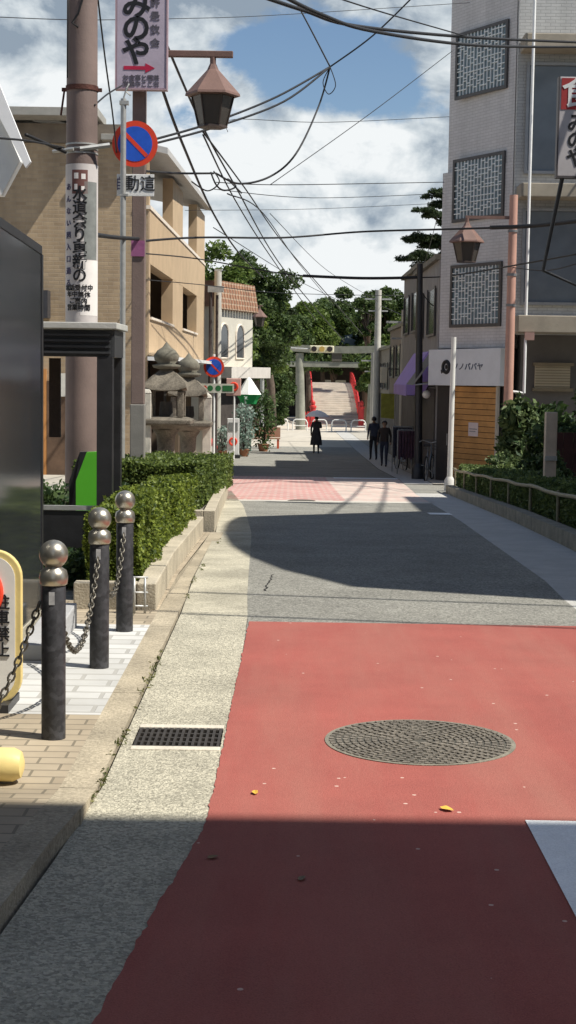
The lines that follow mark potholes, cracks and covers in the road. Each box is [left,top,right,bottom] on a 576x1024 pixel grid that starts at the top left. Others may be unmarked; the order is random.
manhole cover [325,720,516,766]
drain grate [130,724,224,751]
